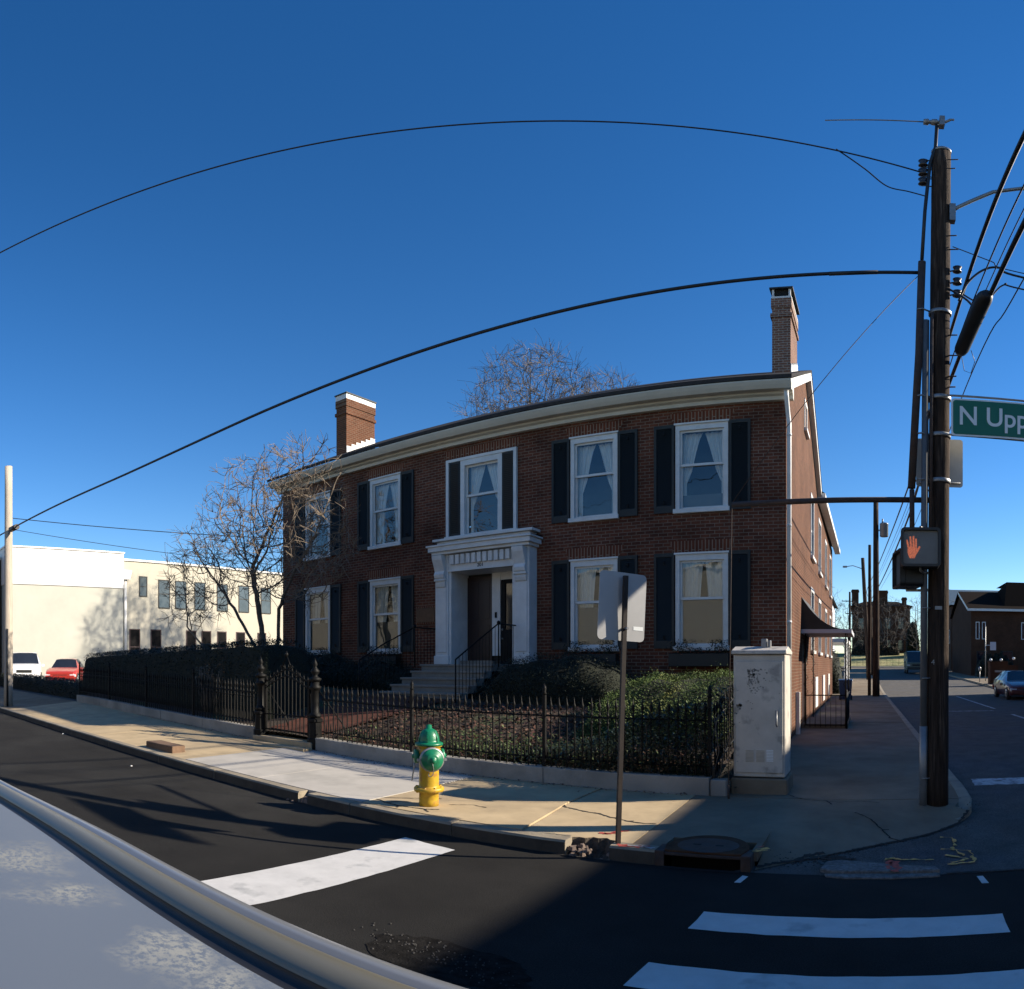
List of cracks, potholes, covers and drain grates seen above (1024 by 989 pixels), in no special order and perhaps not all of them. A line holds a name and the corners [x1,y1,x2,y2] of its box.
drain grate [655,835,755,873]
crack [757,795,985,869]
crack [563,805,656,824]
